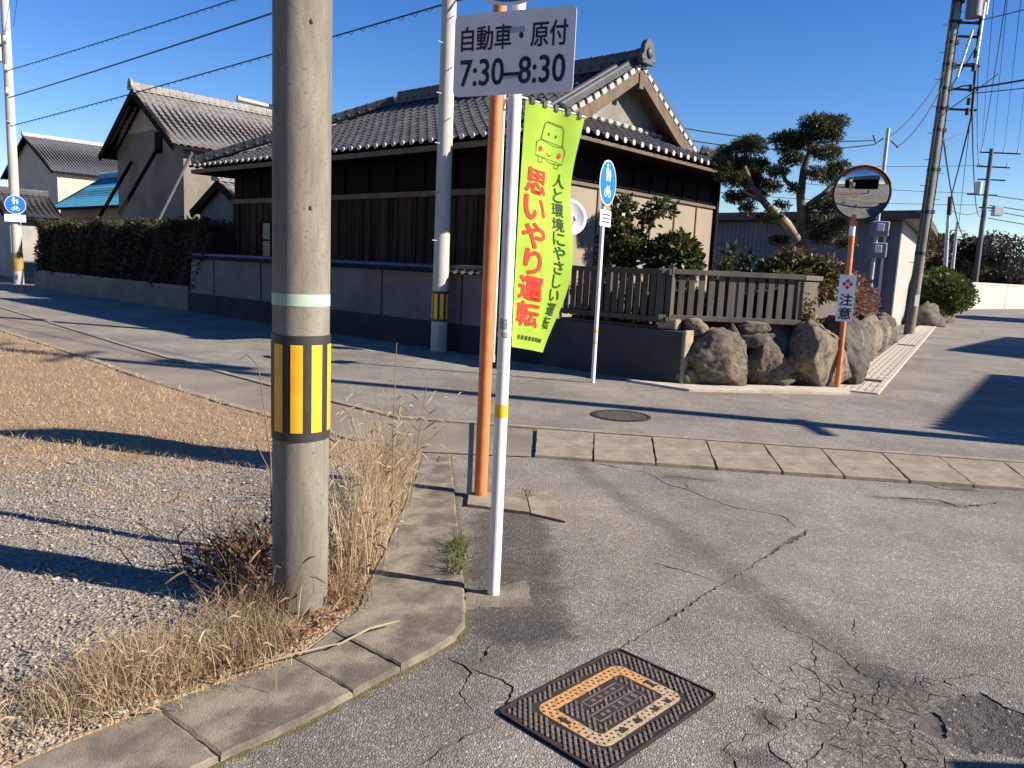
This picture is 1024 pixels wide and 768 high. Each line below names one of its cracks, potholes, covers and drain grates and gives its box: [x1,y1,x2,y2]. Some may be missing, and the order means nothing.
manhole cover [500,648,716,768]
crack [711,619,1023,768]
manhole cover [591,410,651,422]
pothole [938,692,1024,759]
pothole [916,712,948,739]
crack [888,485,999,507]
crack [596,463,814,649]
